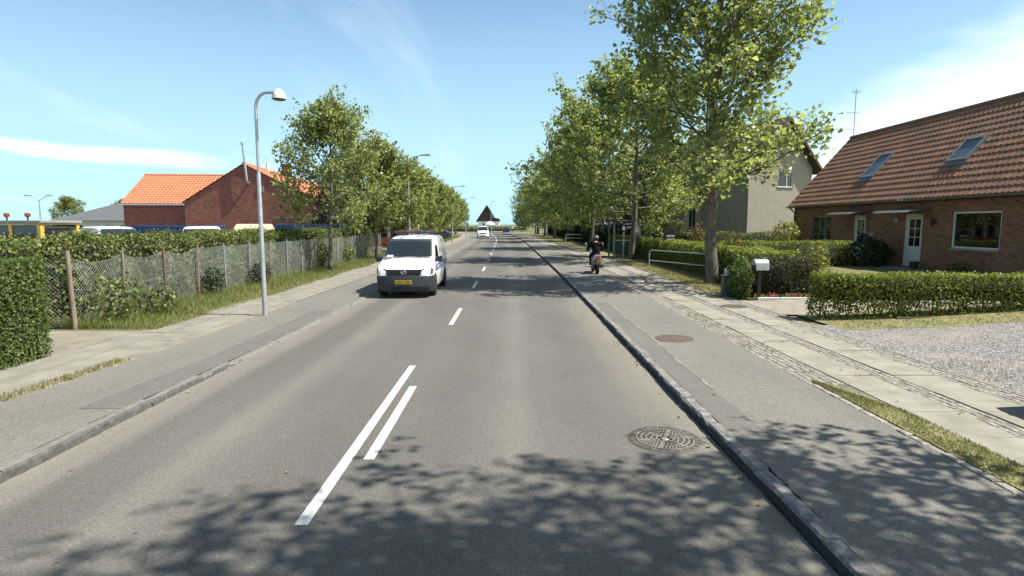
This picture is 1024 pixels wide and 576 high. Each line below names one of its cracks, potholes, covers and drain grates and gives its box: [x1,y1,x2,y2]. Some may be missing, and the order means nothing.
manhole cover [628,426,703,453]
